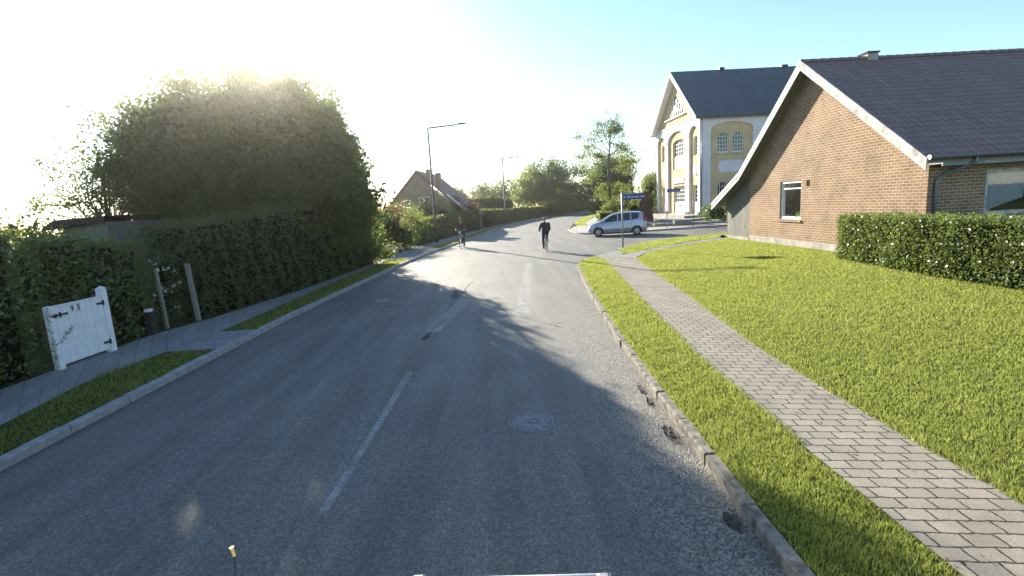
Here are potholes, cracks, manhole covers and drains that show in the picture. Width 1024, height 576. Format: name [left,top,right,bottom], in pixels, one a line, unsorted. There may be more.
pothole [661,425,685,446]
pothole [722,512,746,535]
manhole cover [508,411,559,432]
